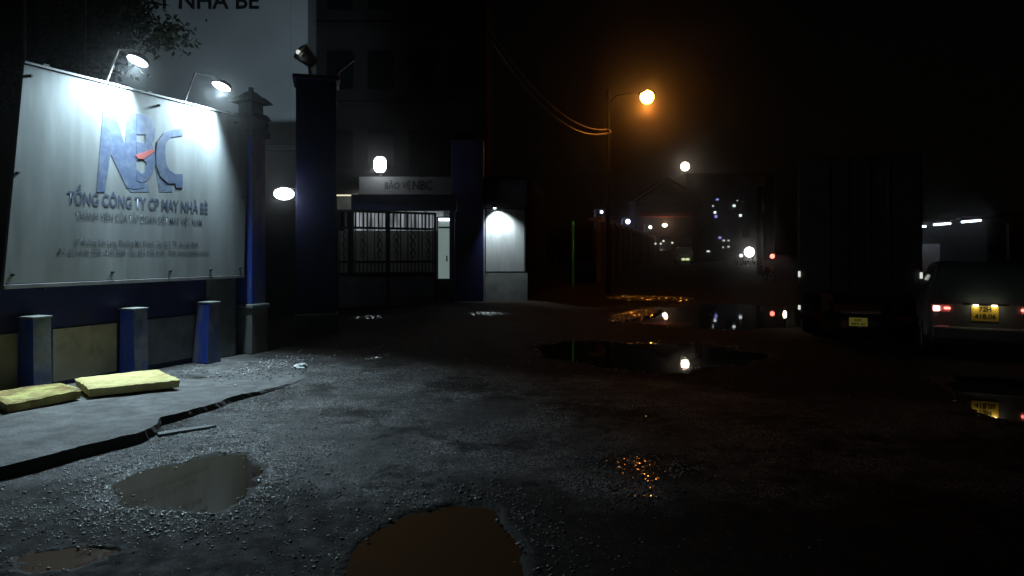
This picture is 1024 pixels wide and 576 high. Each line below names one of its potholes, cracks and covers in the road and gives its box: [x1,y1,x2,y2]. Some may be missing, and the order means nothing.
pothole [0,534,155,576]
pothole [81,445,284,523]
pothole [531,339,780,375]
pothole [312,490,557,576]
pothole [924,372,1024,426]
pothole [606,303,893,331]
